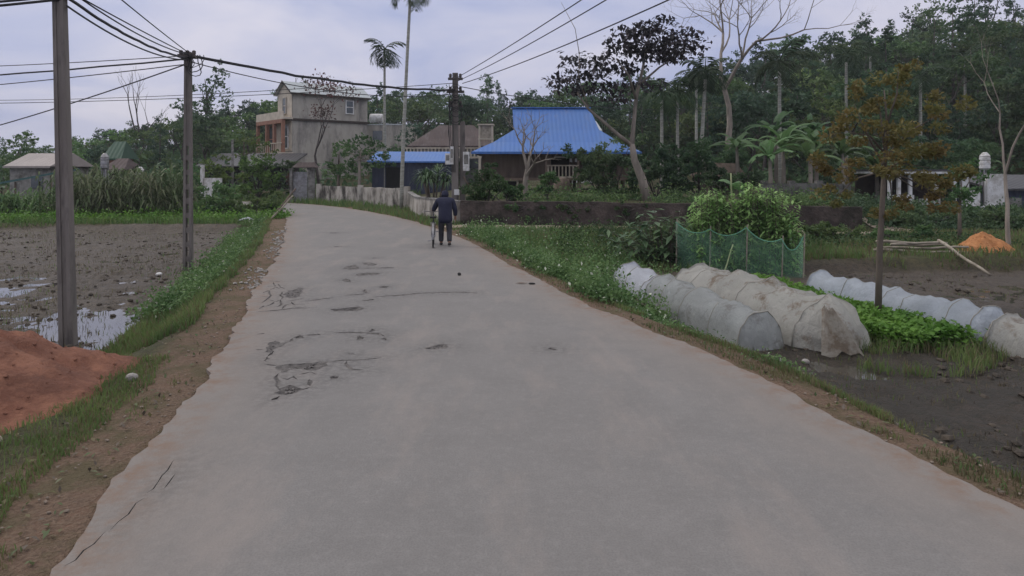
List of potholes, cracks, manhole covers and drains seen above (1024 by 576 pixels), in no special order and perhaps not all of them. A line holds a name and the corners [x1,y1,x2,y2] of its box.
pothole [275,385,309,395]
crack [259,281,472,312]
pothole [275,361,329,373]
crack [65,461,174,566]
crack [256,329,384,388]
